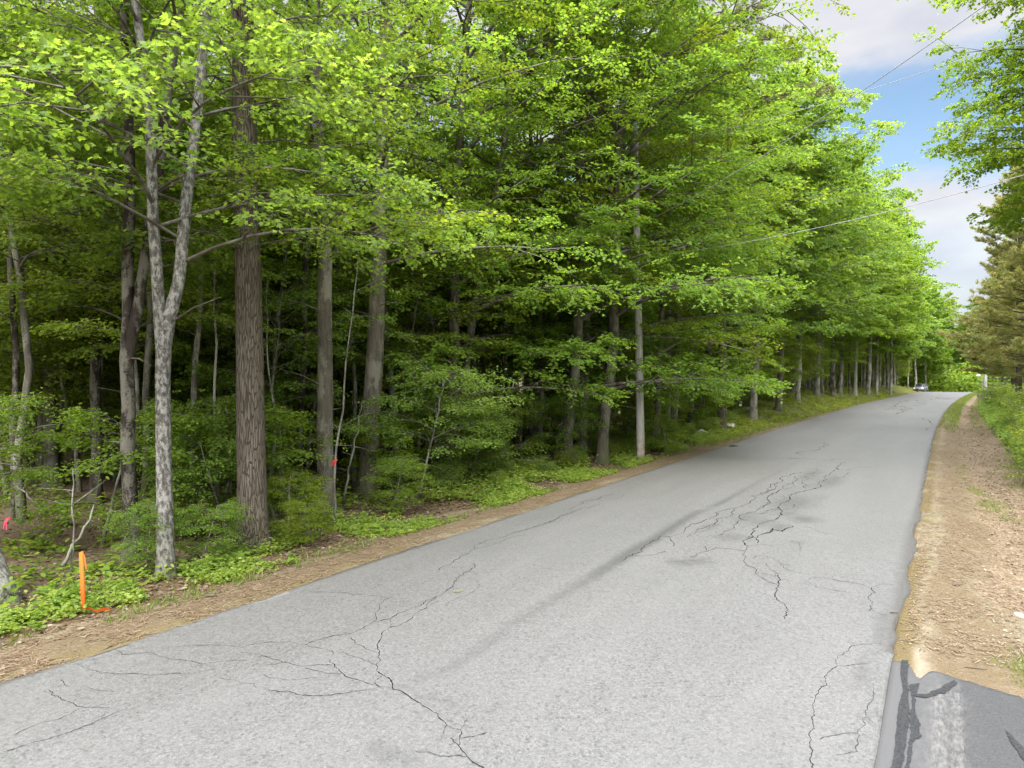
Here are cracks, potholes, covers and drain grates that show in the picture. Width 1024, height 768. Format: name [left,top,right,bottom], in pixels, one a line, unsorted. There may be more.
crack [7,476,644,768]
crack [808,643,881,768]
crack [624,468,849,619]
